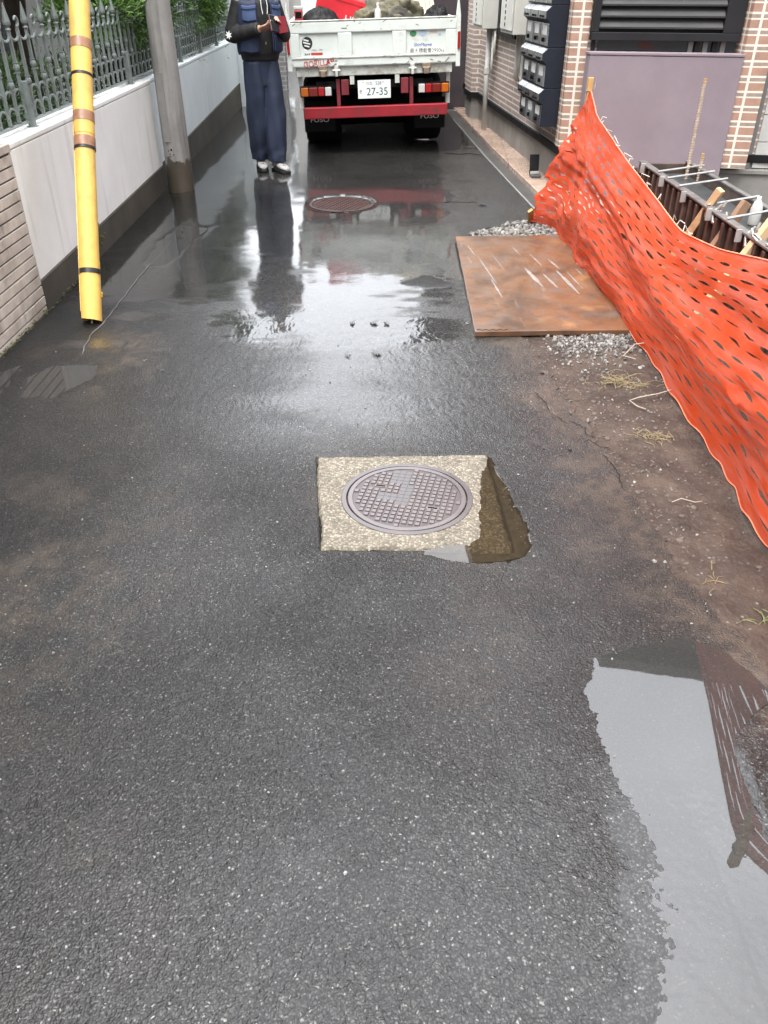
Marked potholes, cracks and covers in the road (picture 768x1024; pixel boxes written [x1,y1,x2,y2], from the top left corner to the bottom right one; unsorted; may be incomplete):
crack [533,390,625,490]
pothole [458,461,530,563]
manhole cover [341,464,473,535]
manhole cover [309,196,374,212]
